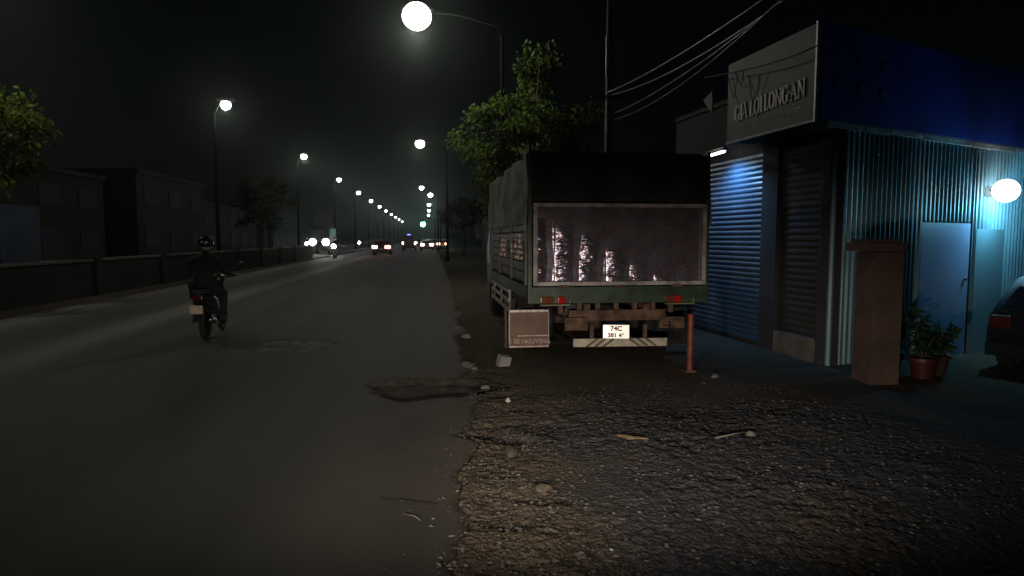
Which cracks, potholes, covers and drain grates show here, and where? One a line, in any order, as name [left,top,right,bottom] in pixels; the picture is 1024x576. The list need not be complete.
pothole [363,378,505,402]
